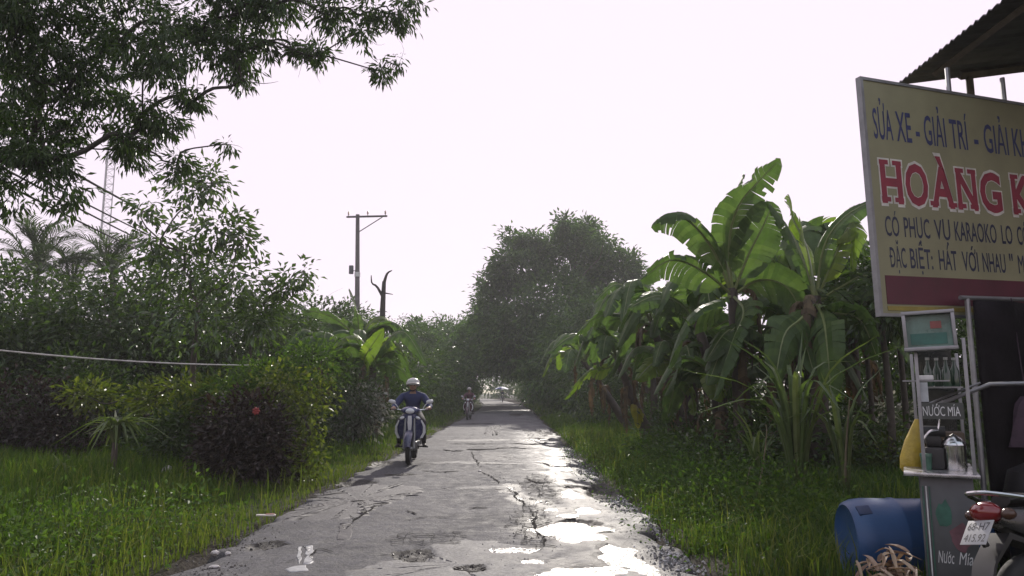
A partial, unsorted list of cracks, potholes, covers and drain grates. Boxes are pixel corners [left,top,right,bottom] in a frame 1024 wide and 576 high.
pothole [453,564,486,572]
crack [422,437,588,549]
pothole [390,548,435,563]
